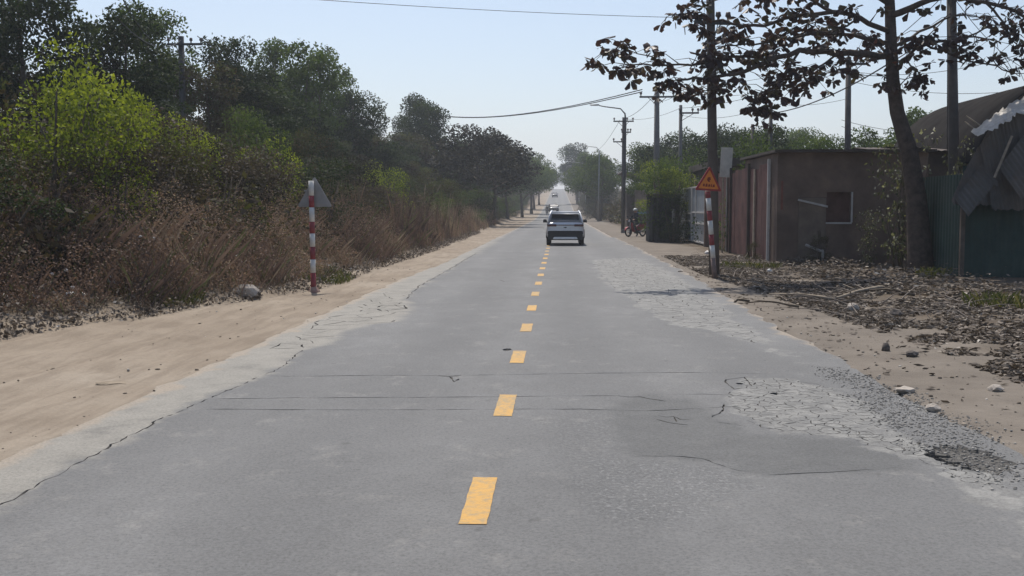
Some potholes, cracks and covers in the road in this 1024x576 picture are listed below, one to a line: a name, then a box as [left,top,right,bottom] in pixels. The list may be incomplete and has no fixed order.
pothole [923,443,1019,476]
crack [0,253,1002,505]
